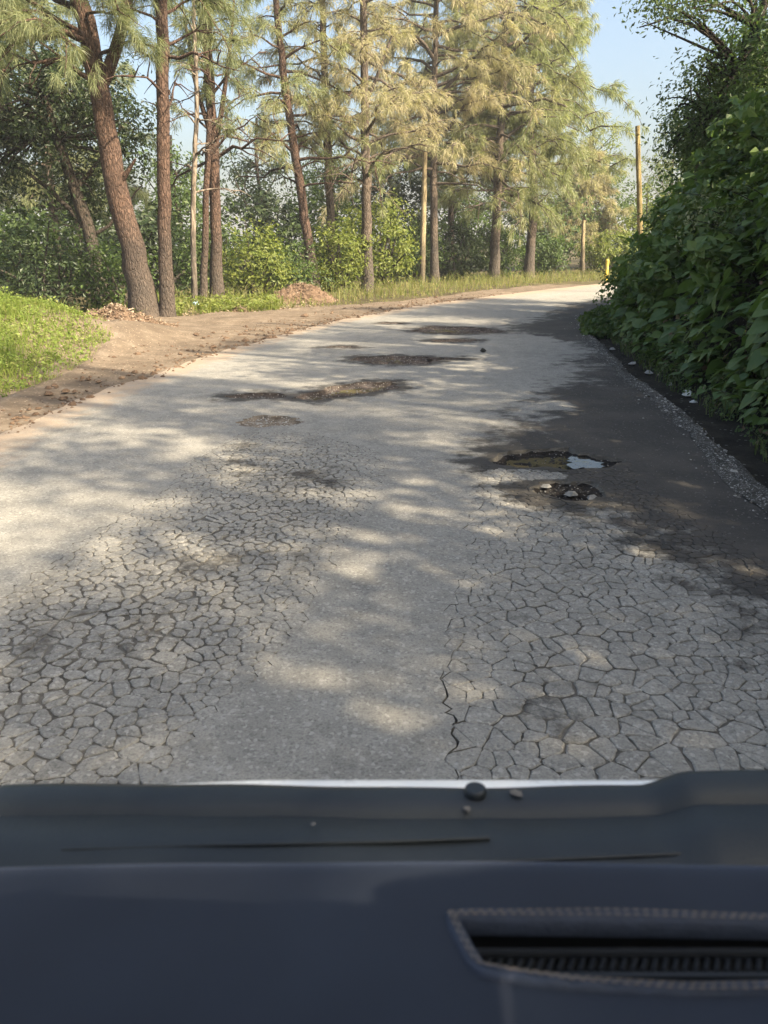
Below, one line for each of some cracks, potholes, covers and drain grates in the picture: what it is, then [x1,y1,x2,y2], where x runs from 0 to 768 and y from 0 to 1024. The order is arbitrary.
pothole [529,480,606,501]
pothole [351,355,445,365]
pothole [235,415,304,428]
crack [441,462,768,780]
pothole [488,447,627,469]
pothole [291,381,401,400]
crack [0,432,389,786]
pothole [410,326,505,334]
